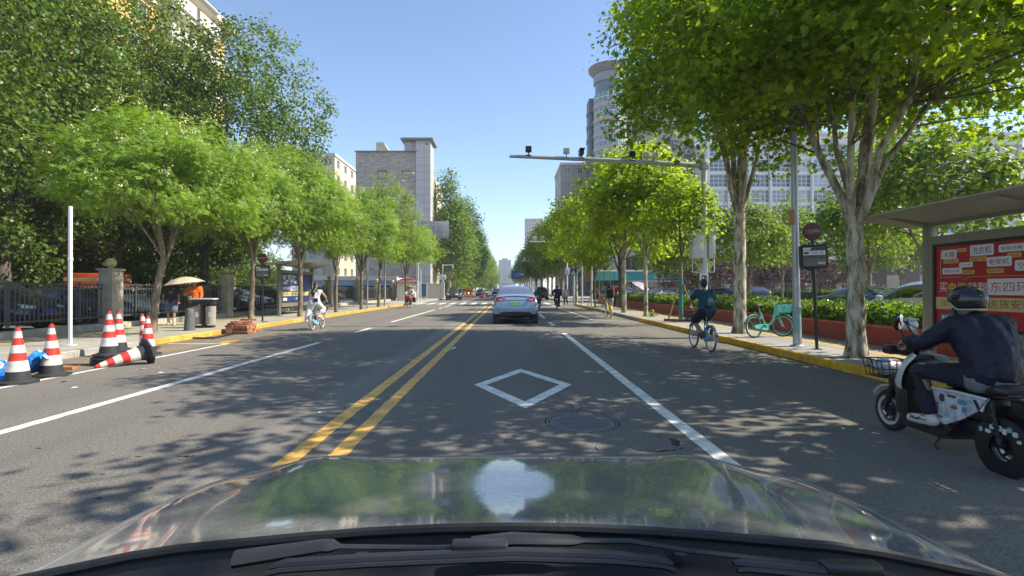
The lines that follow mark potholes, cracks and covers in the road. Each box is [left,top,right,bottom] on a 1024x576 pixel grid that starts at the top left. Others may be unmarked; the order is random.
manhole cover [545,413,620,432]
